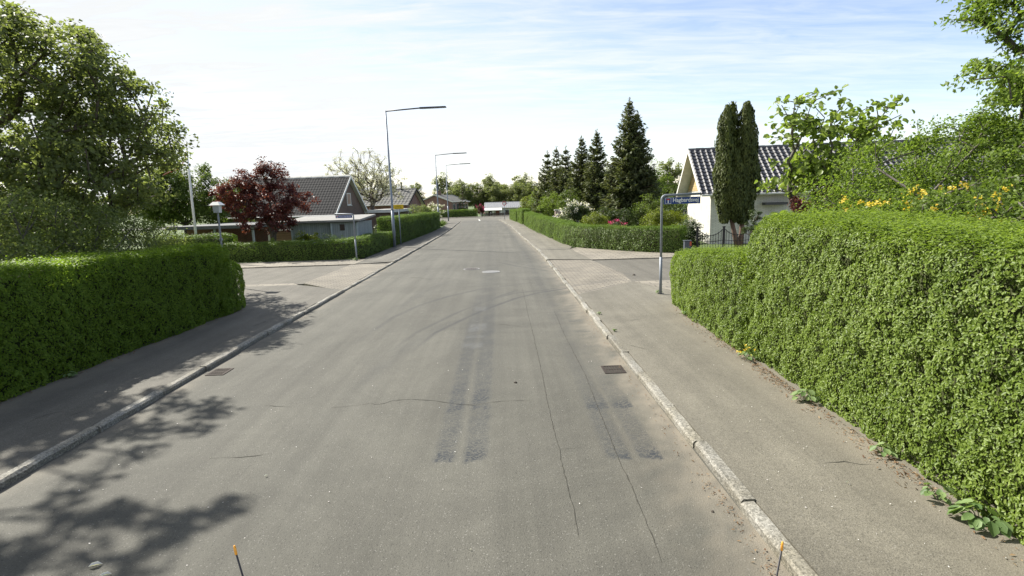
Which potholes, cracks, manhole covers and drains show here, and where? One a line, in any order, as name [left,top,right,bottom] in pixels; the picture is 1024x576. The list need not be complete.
crack [522,290,580,540]
drain grate [205,368,234,376]
drain grate [601,365,627,374]
